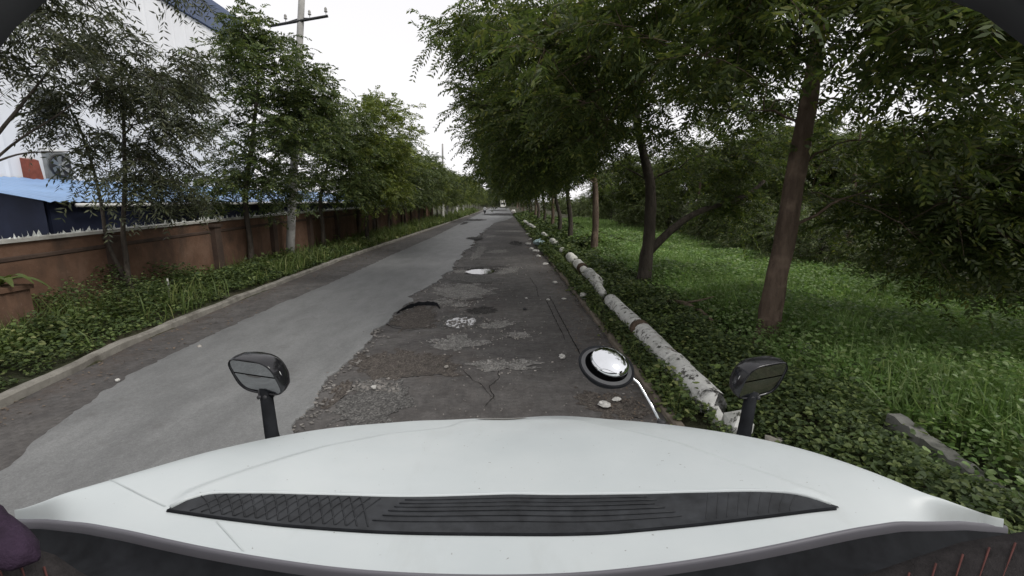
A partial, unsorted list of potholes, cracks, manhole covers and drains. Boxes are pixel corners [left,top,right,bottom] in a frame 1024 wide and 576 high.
pothole [385,301,440,334]
